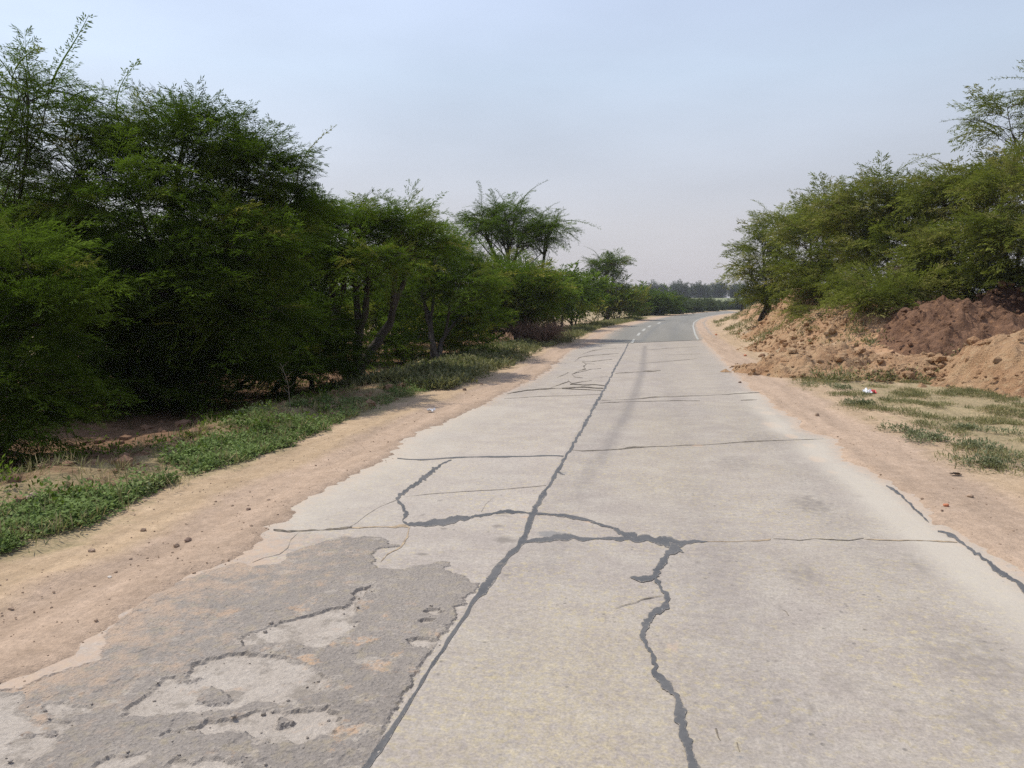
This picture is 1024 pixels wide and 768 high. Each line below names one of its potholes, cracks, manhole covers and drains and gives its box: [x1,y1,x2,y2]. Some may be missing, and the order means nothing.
crack [414,485,546,512]
crack [397,439,809,460]
crack [504,347,760,403]
